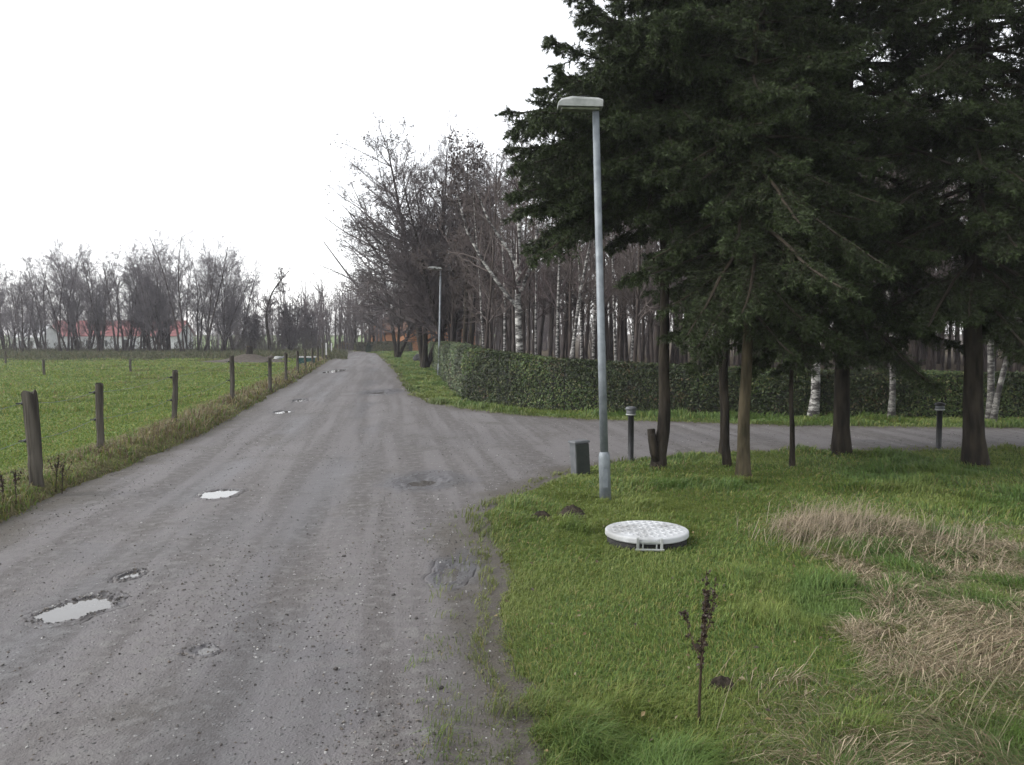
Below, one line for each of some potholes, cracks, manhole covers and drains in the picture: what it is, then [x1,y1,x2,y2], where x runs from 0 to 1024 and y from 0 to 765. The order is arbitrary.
pothole [383,472,463,492]
pothole [13,590,130,630]
pothole [112,567,148,583]
manhole cover [605,520,689,552]
pothole [191,487,249,501]
pothole [183,642,222,659]
